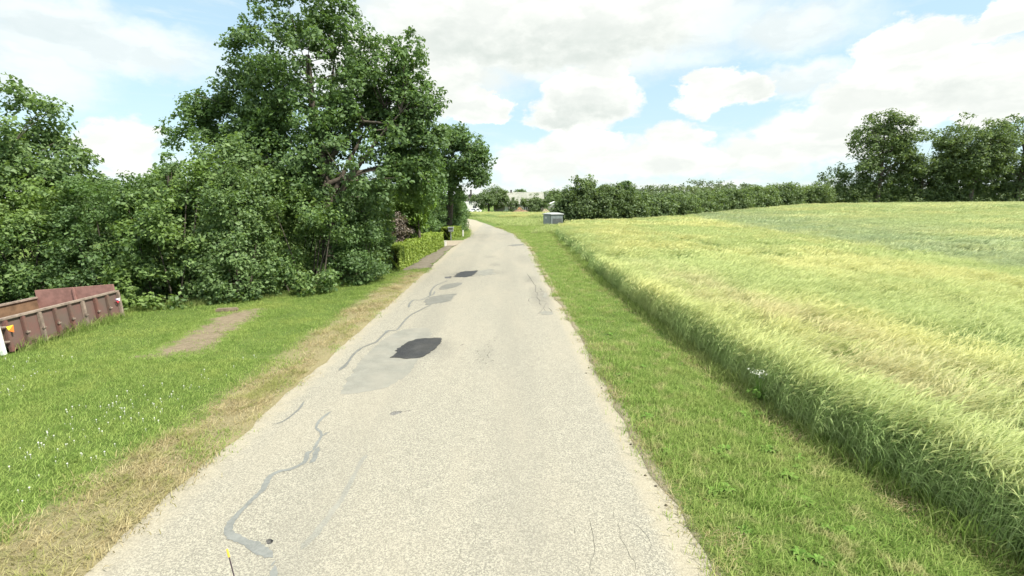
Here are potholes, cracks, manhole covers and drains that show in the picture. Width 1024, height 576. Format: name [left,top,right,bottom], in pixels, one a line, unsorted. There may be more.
crack [574,509,655,573]
